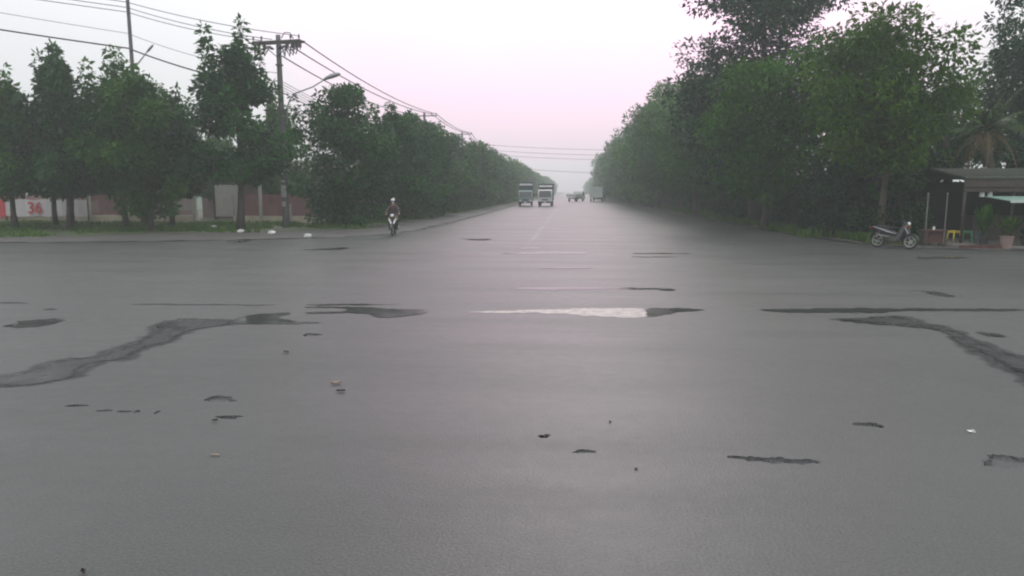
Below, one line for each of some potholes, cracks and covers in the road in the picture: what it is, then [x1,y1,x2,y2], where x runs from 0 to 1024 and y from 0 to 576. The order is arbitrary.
pothole [981,454,1024,469]
pothole [727,455,820,465]
